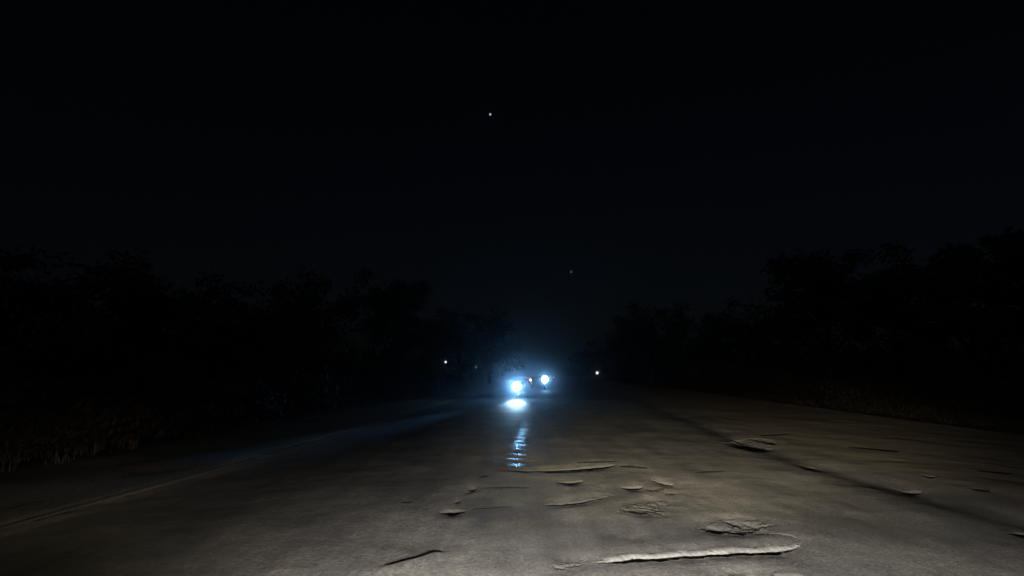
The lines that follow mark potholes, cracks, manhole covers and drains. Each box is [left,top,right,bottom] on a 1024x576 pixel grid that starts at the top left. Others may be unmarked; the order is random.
pothole [722,437,777,451]
pothole [695,519,775,536]
pothole [619,501,673,516]
